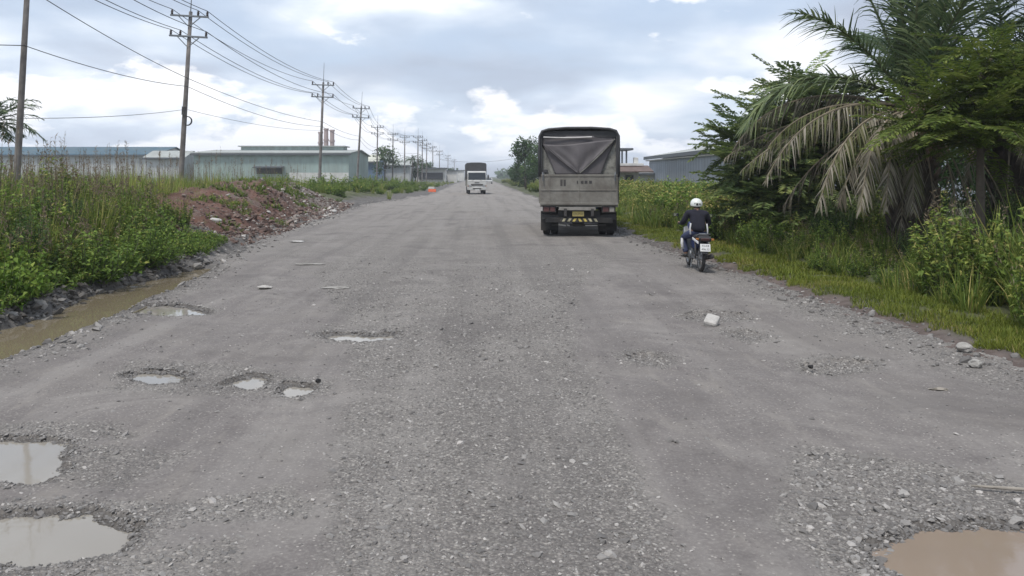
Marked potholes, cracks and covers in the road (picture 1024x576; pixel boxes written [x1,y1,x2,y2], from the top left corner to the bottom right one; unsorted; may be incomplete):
pothole [262,378,333,398]
pothole [114,366,199,385]
pothole [123,301,217,317]
pothole [210,370,280,393]
pothole [0,432,90,487]
pothole [0,501,168,574]
pothole [791,356,882,375]
pothole [850,513,1024,576]
pothole [616,351,674,367]
pothole [309,327,405,343]
